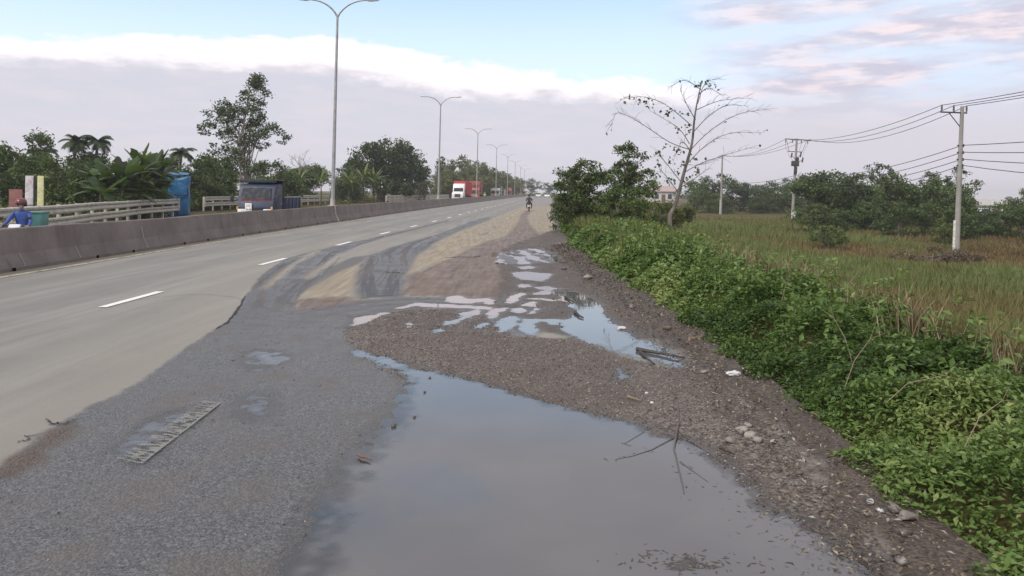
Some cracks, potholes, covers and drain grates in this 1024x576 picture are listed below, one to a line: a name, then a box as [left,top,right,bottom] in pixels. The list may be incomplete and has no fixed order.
pothole [509,271,555,282]
pothole [236,348,296,372]
pothole [513,317,545,335]
pothole [494,248,559,265]
pothole [249,344,934,576]
pothole [553,290,696,368]
pothole [437,308,486,326]
pothole [344,310,392,327]
pothole [508,305,530,313]
pothole [501,291,530,304]
pothole [230,391,280,424]
pothole [440,294,496,304]
